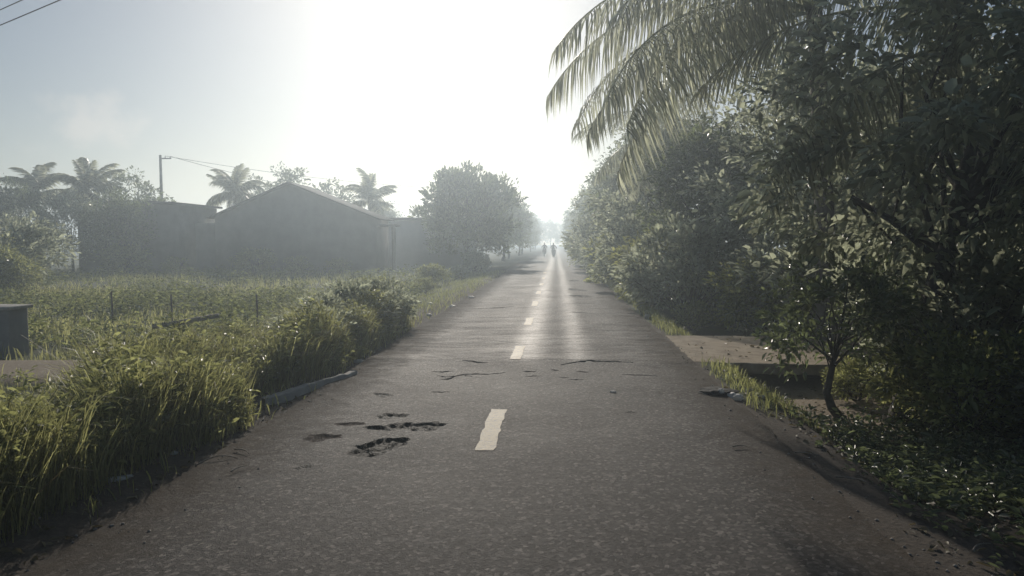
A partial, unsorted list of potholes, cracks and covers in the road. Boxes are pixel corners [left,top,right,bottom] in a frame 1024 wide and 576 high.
pothole [360,421,449,432]
pothole [302,433,343,442]
pothole [347,437,410,458]
crack [433,371,506,393]
crack [523,360,652,380]
